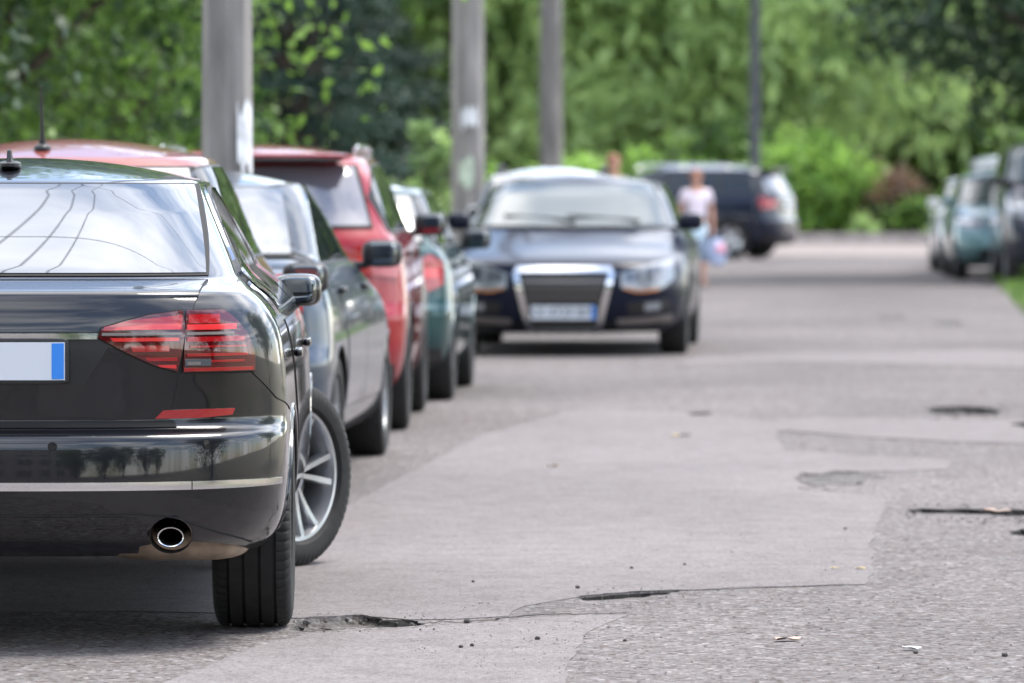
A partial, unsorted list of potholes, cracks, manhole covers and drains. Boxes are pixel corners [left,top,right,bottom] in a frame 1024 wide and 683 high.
crack [423,612,625,624]
pothole [925,406,999,415]
pothole [794,470,887,487]
pothole [291,614,423,632]
